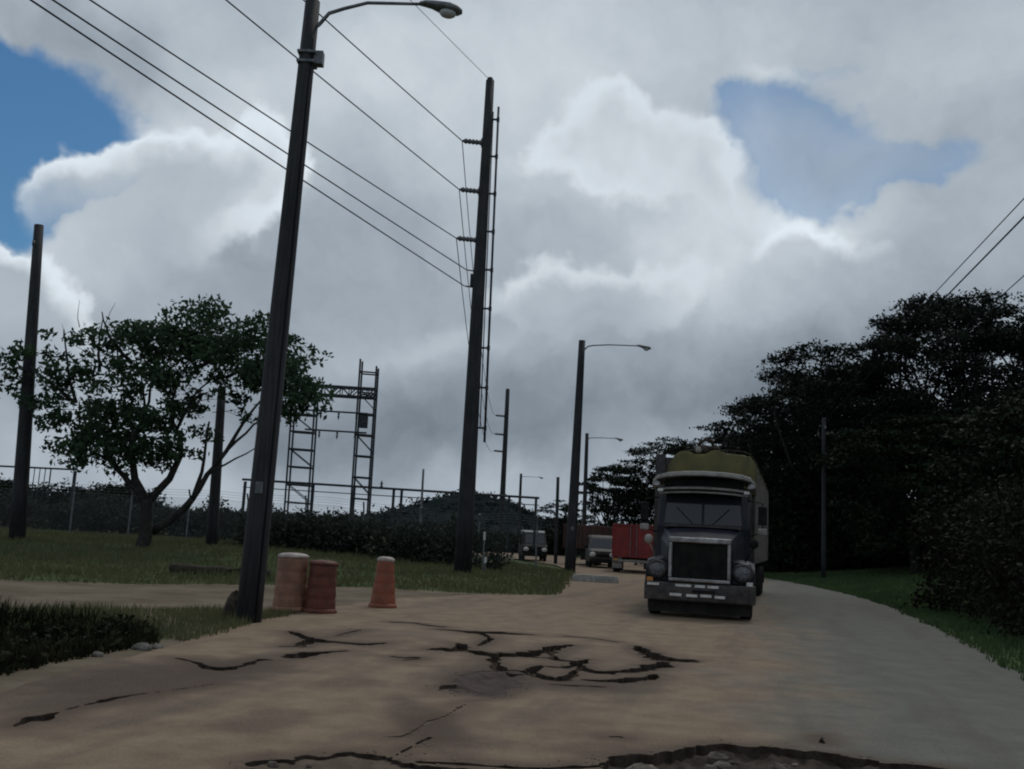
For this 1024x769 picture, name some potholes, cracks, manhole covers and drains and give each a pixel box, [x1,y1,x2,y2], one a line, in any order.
crack [13,622,700,727]
pothole [598,744,945,769]
crack [388,704,465,738]
